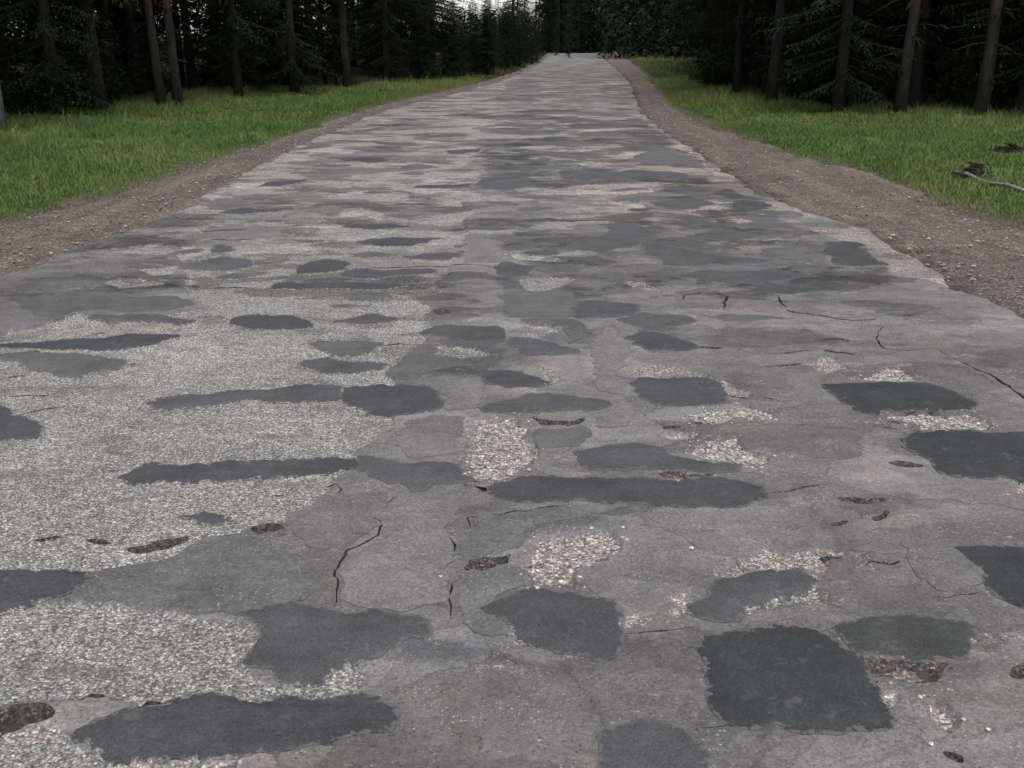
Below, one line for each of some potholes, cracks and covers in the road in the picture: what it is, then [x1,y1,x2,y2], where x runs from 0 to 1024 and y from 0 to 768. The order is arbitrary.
crack [761,295,1024,405]
pothole [454,549,532,575]
crack [322,495,401,607]
pothole [117,532,200,559]
pothole [0,699,69,746]
crack [923,587,990,604]
pothole [856,652,961,691]
